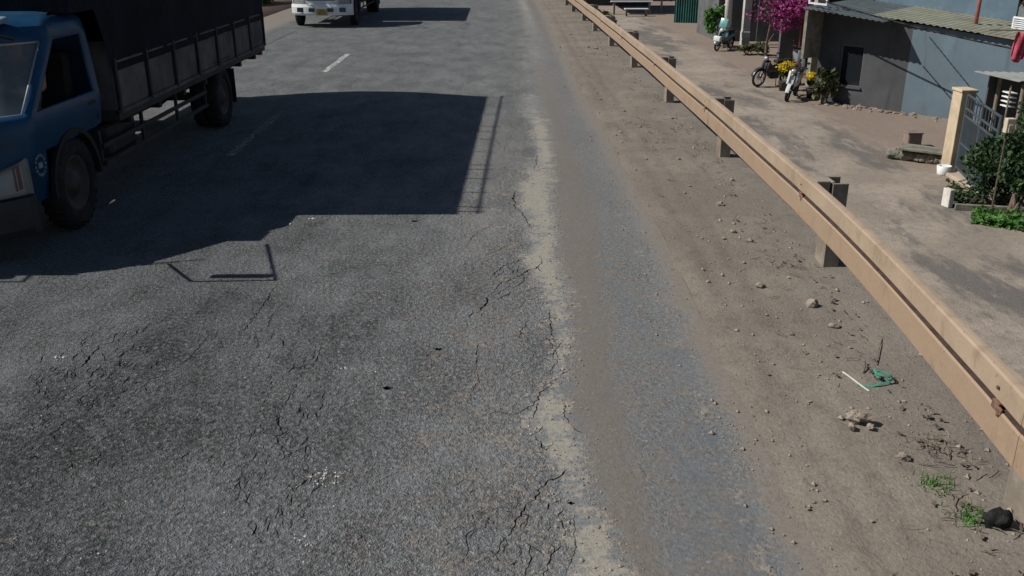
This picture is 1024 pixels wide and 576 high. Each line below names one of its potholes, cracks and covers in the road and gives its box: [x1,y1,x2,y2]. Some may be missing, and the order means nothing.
crack [243,286,321,387]
crack [467,228,582,451]
crack [462,469,577,576]
crack [24,325,325,543]
